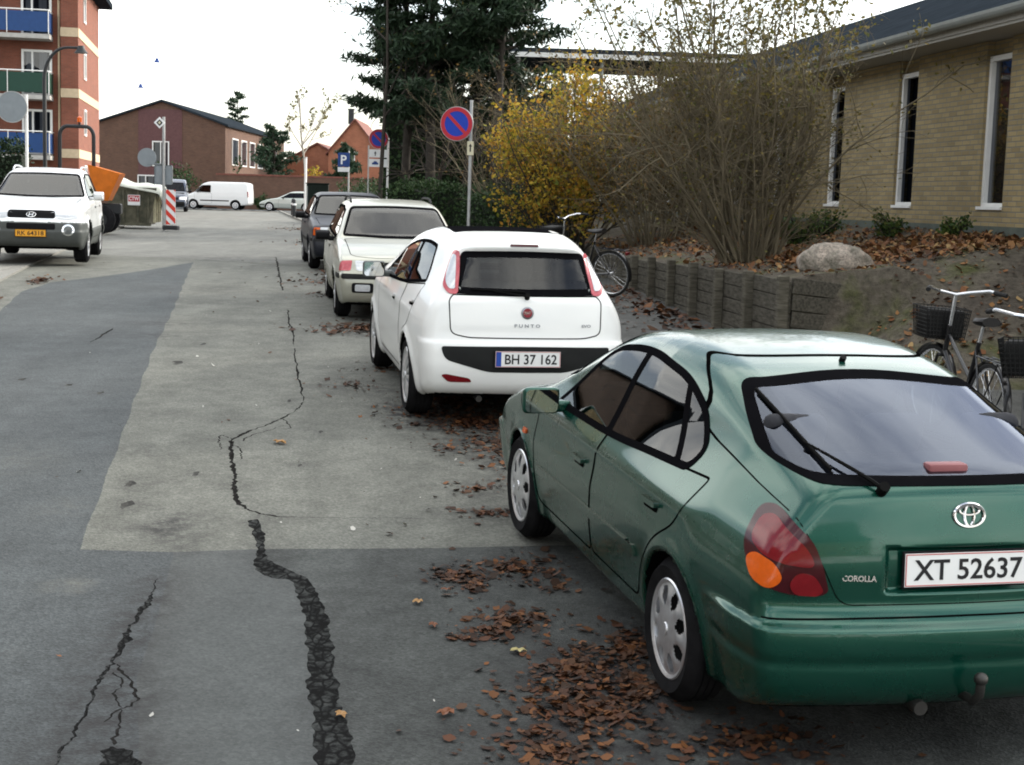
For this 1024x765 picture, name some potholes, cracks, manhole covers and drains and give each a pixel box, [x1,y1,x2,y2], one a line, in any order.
crack [55,579,157,765]
crack [275,257,283,290]
crack [218,310,356,765]
